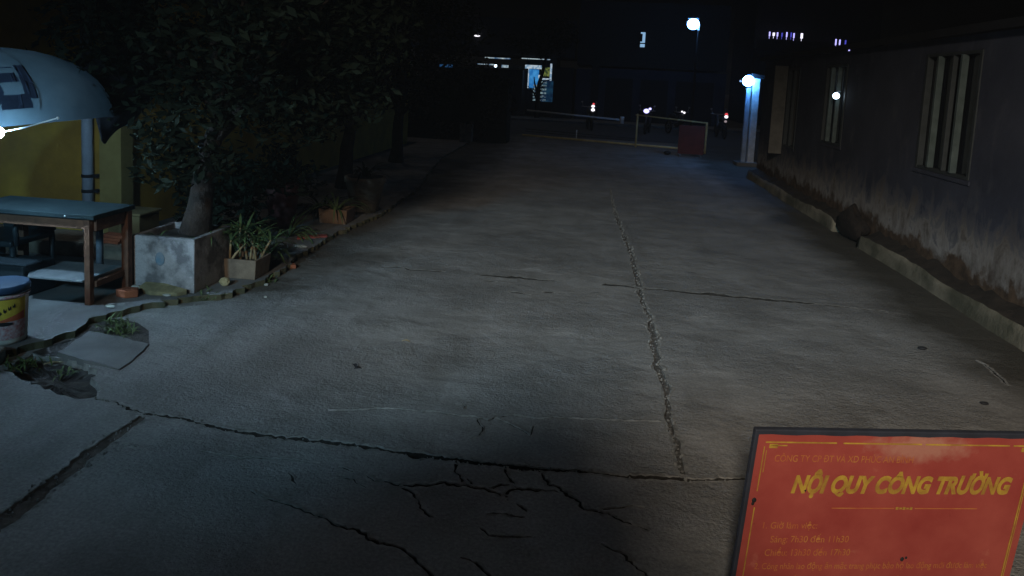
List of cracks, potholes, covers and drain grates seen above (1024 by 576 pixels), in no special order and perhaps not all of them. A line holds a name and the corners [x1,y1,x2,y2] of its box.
crack [0,189,890,576]
pothole [1,353,102,400]
